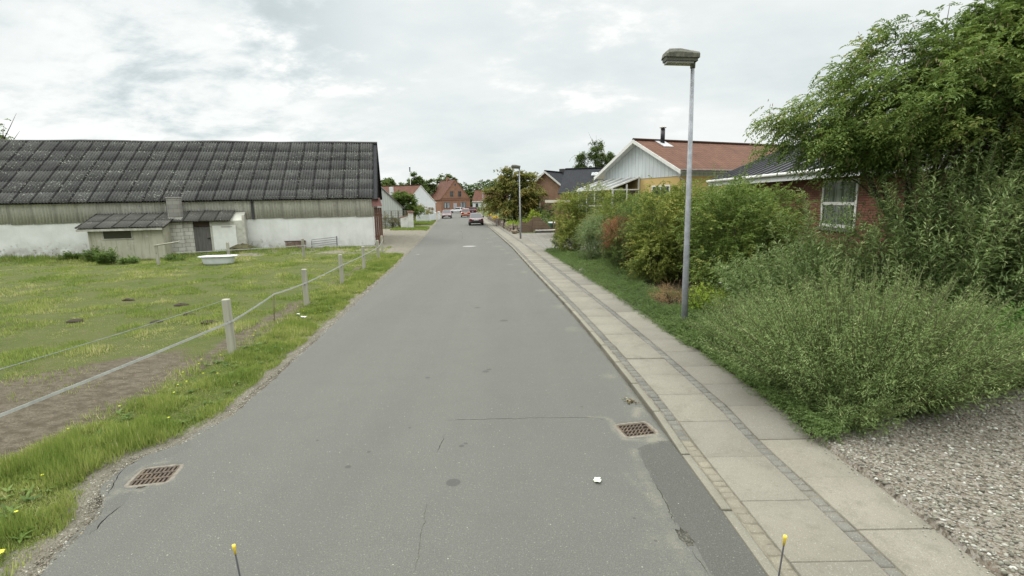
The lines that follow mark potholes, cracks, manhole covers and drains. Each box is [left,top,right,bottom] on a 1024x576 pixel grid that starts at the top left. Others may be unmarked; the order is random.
crack [415,417,599,572]
pothole [675,527,695,547]
crack [92,468,125,532]
